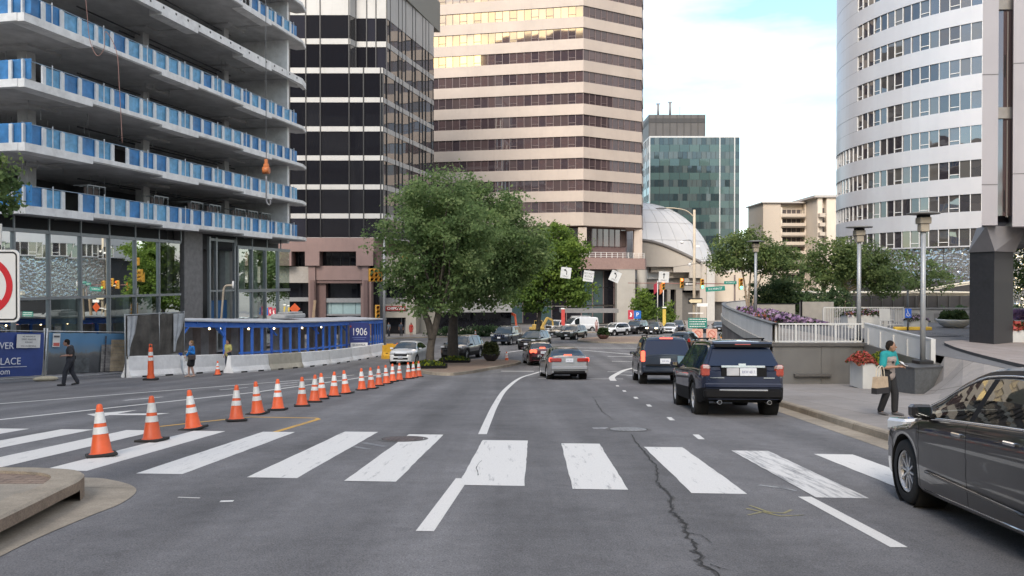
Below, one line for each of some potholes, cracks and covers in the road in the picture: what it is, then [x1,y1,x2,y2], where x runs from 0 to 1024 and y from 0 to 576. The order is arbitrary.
crack [631,434,728,576]
